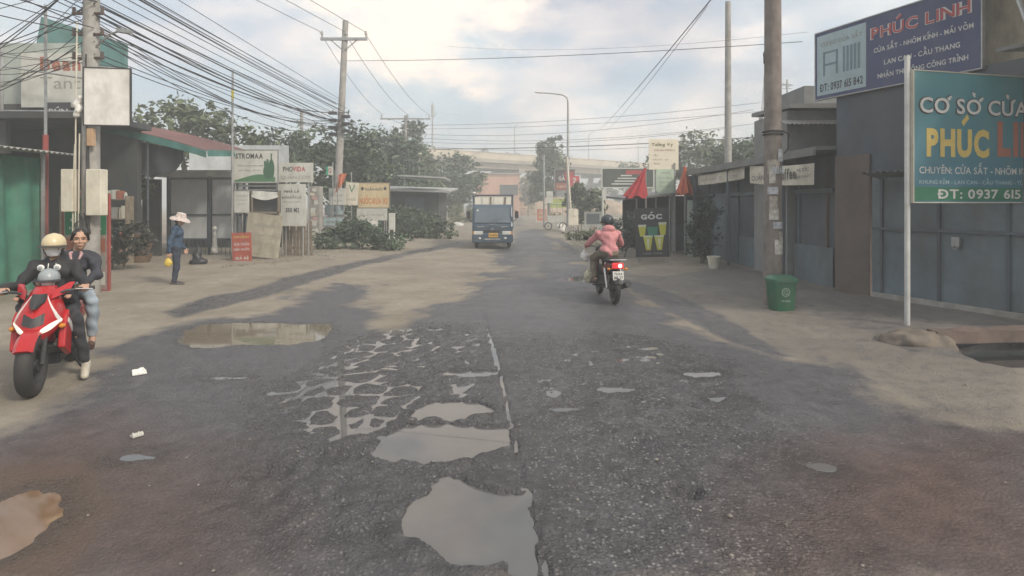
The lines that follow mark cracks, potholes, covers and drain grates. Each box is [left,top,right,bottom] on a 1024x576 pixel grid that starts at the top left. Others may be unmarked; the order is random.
pothole [396,471,549,576]
crack [210,322,517,570]
pothole [361,420,518,467]
pothole [408,398,495,419]
